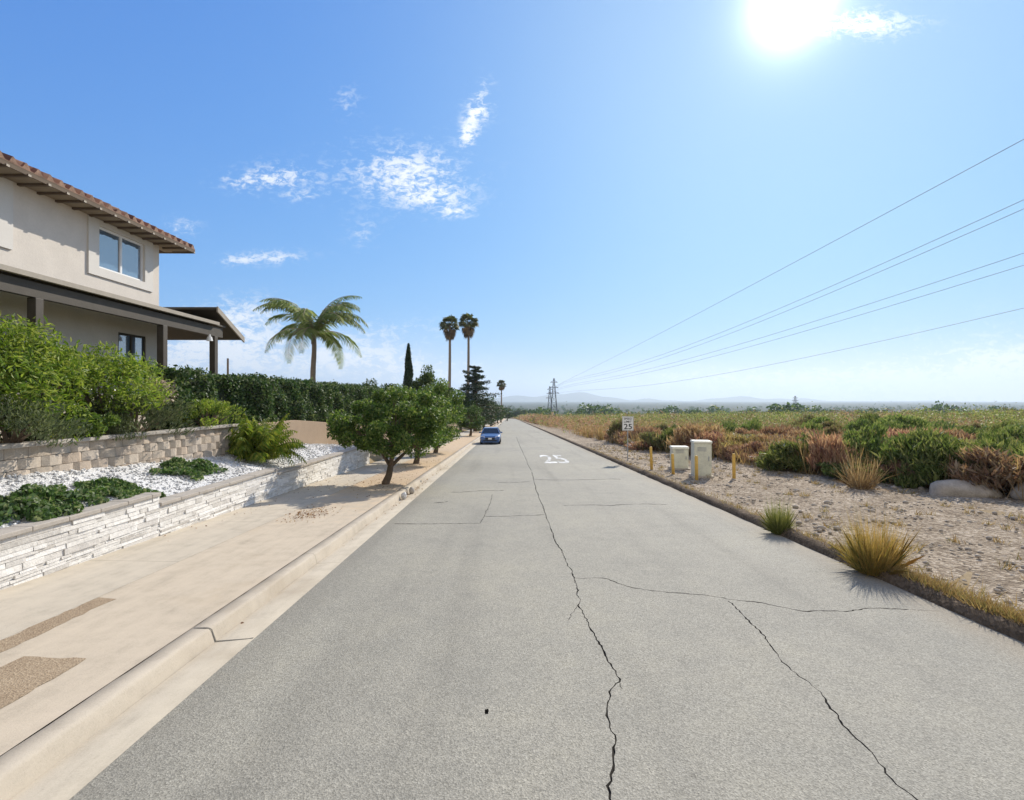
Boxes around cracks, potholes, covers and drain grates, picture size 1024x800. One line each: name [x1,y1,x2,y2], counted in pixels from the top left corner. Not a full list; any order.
crack [441,440,926,800]
